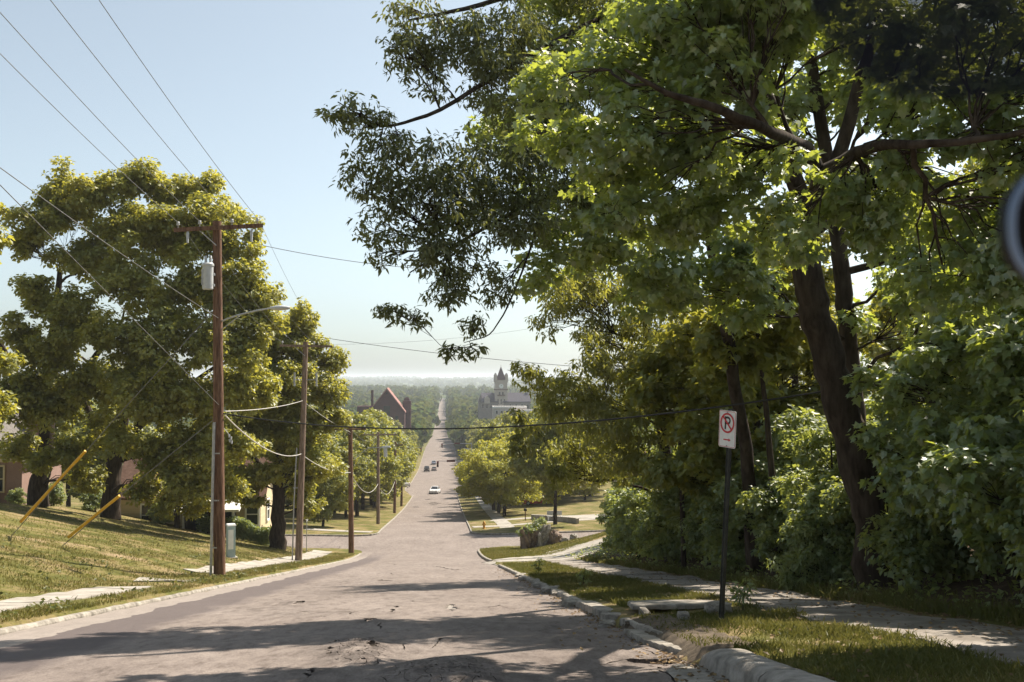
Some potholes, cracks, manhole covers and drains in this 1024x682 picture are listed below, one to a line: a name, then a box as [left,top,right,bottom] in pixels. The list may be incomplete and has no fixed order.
crack [329,608,496,682]
